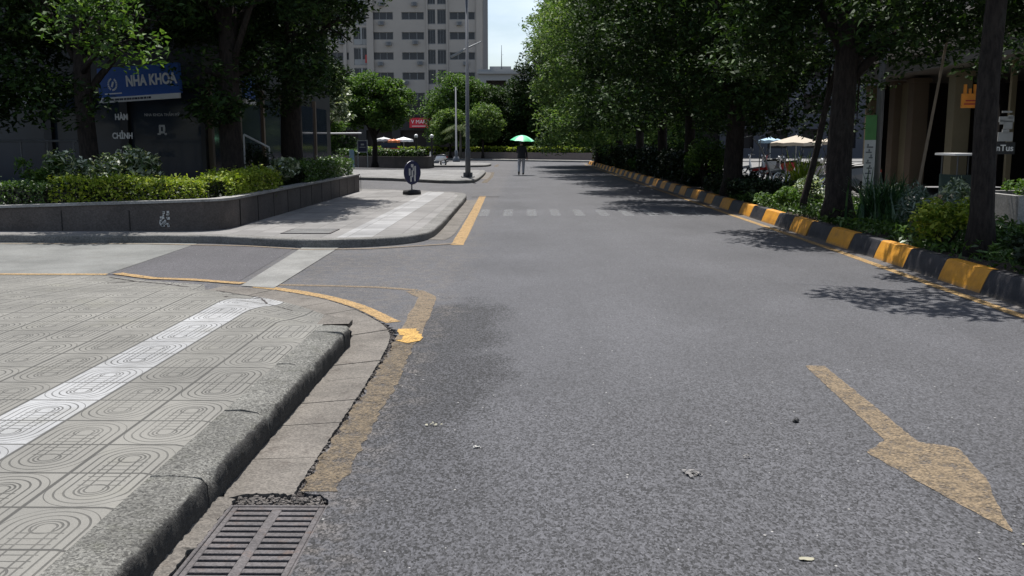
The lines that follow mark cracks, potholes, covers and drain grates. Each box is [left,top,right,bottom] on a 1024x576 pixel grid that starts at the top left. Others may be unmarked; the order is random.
drain grate [173,505,328,576]
